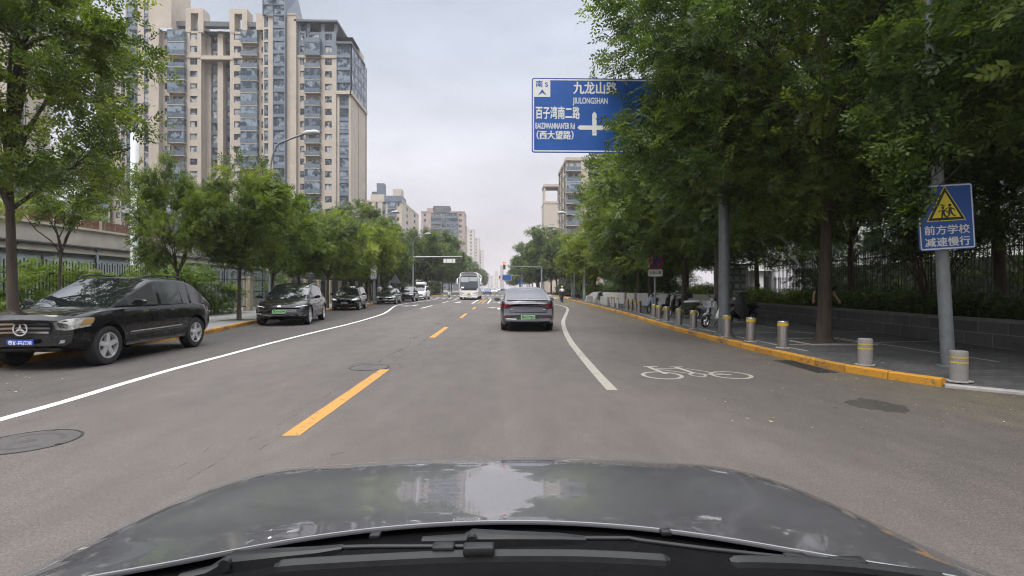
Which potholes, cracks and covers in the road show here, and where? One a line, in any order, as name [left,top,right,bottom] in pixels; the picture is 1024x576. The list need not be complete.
manhole cover [0,429,84,455]
